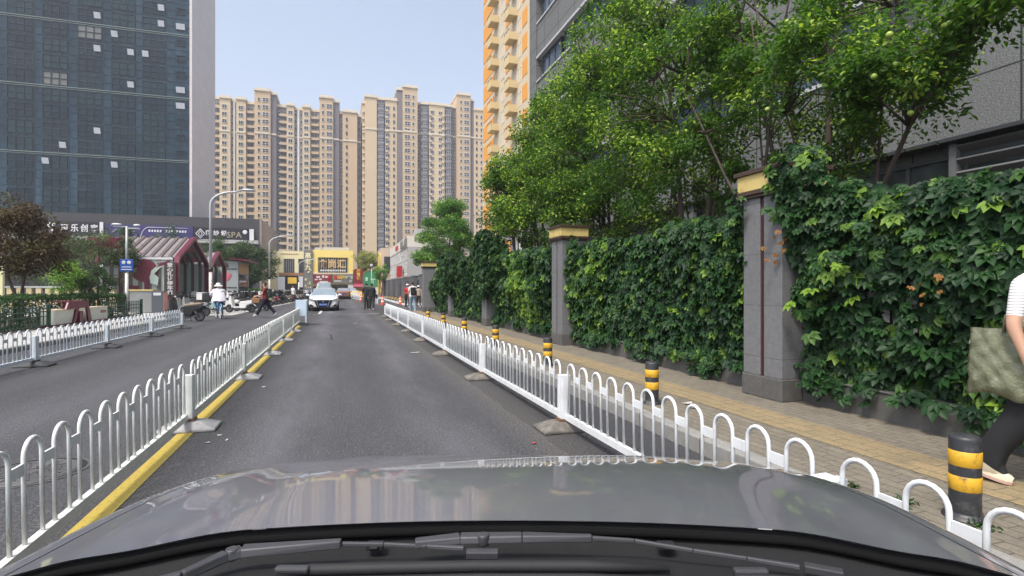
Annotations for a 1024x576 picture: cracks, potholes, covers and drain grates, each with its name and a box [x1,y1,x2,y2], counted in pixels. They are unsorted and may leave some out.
manhole cover [0,457,90,490]
